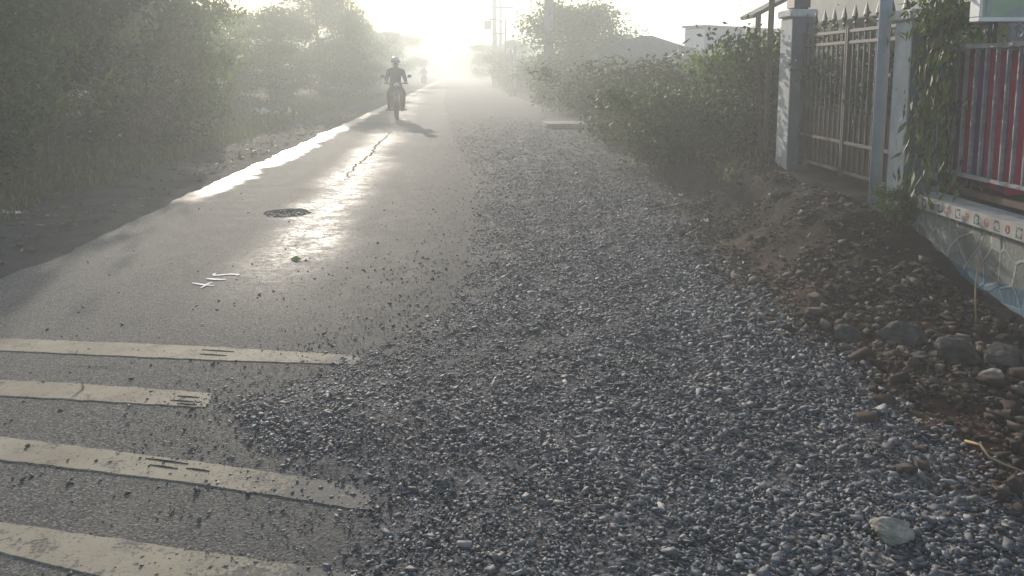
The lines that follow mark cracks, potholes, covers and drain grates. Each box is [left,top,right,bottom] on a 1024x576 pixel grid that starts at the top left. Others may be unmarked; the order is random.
crack [344,131,391,180]
